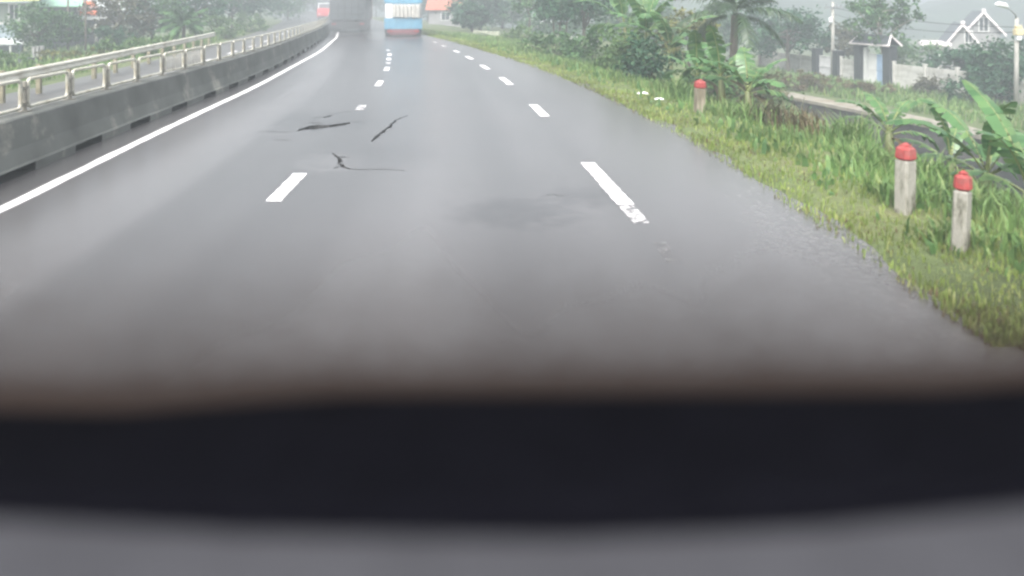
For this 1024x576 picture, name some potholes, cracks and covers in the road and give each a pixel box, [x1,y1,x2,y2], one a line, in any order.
crack [332,116,406,171]
